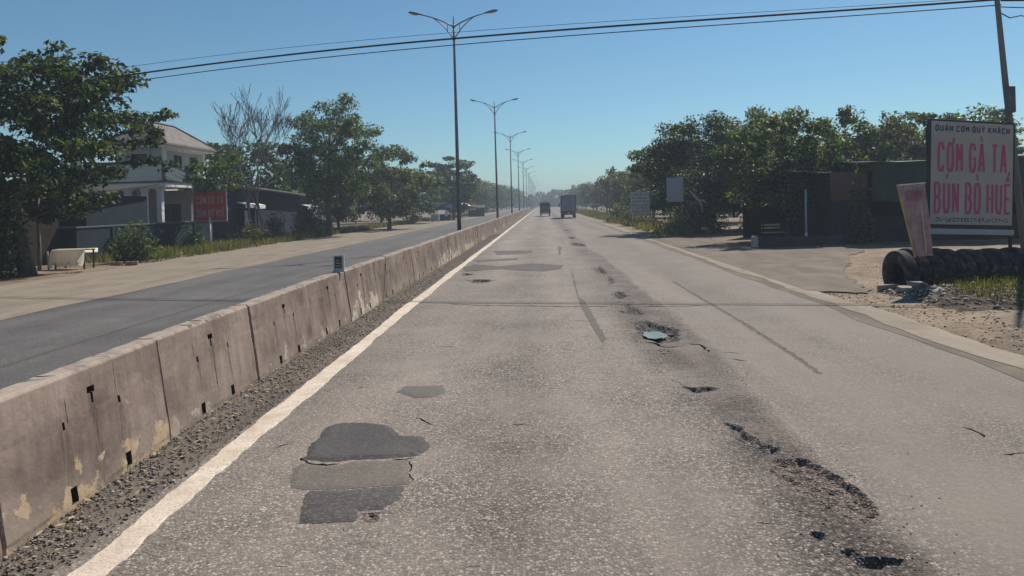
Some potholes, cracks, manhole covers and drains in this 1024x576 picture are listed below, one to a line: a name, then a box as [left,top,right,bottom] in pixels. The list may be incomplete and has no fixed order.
pothole [672,376,721,396]
pothole [768,455,908,526]
pothole [631,319,683,344]
pothole [722,418,785,457]
crack [648,342,744,361]
pothole [827,537,914,576]
